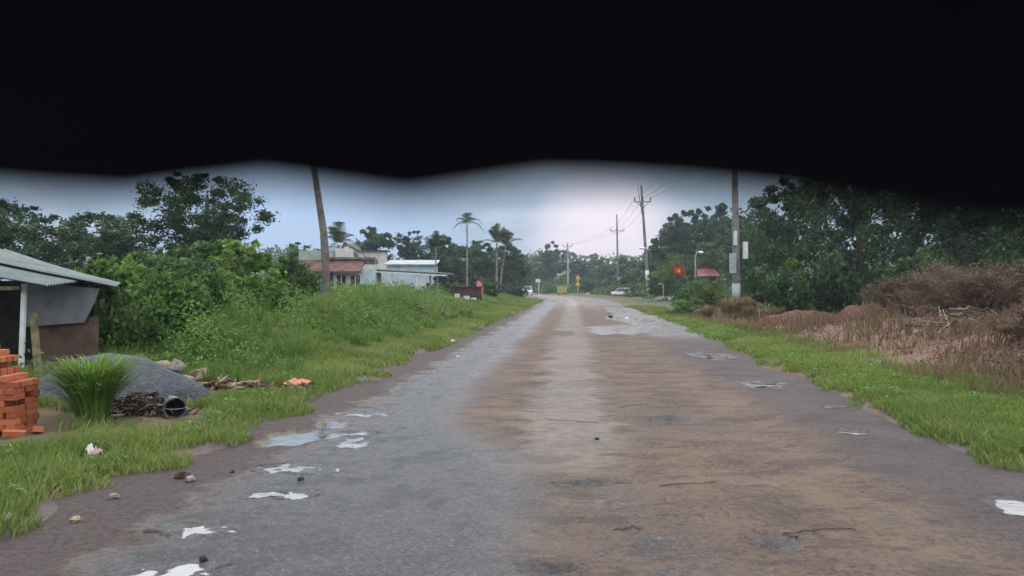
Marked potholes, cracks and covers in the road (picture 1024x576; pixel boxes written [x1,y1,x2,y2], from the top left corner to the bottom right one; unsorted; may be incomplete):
pothole [728,379,797,390]
crack [782,528,856,537]
pothole [308,418,352,433]
pothole [682,352,744,361]
pothole [247,427,351,449]
crack [518,410,599,424]
